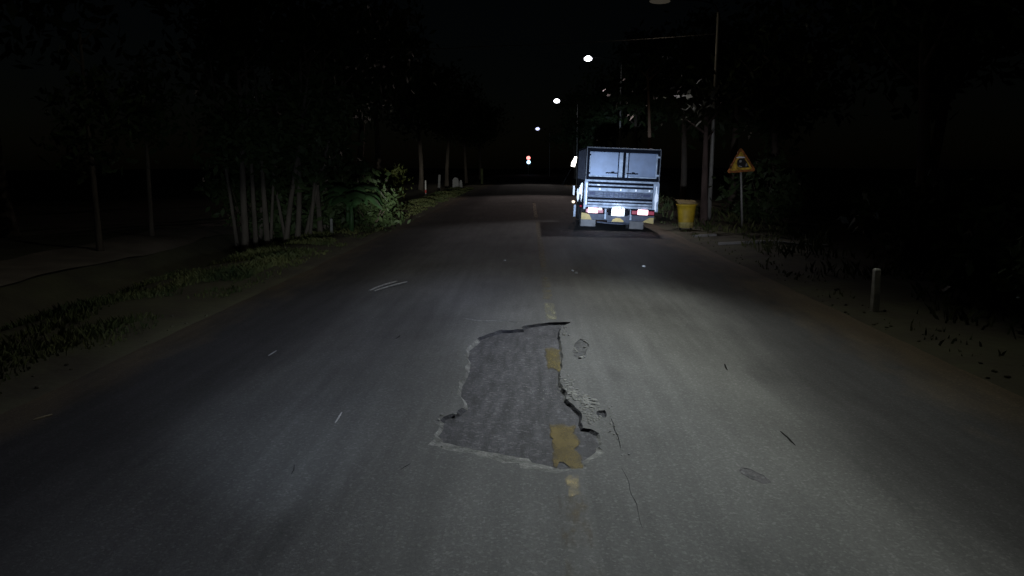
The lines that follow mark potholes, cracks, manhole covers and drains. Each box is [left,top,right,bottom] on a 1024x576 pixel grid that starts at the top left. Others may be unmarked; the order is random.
pothole [428,322,607,473]
pothole [739,467,771,484]
